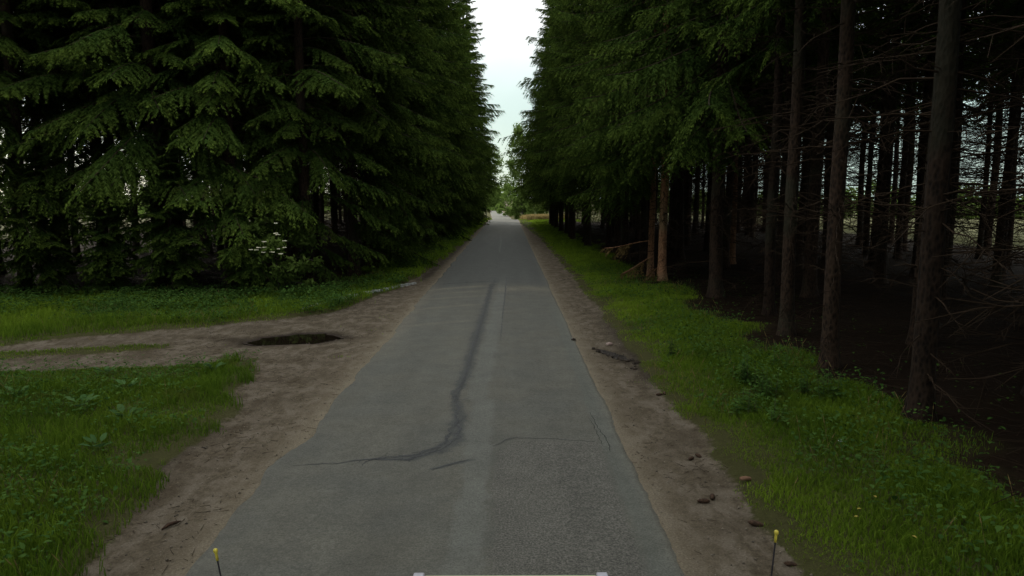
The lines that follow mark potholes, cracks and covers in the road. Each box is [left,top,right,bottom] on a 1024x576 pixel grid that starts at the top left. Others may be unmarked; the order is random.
pothole [242,333,344,346]
crack [496,413,611,452]
